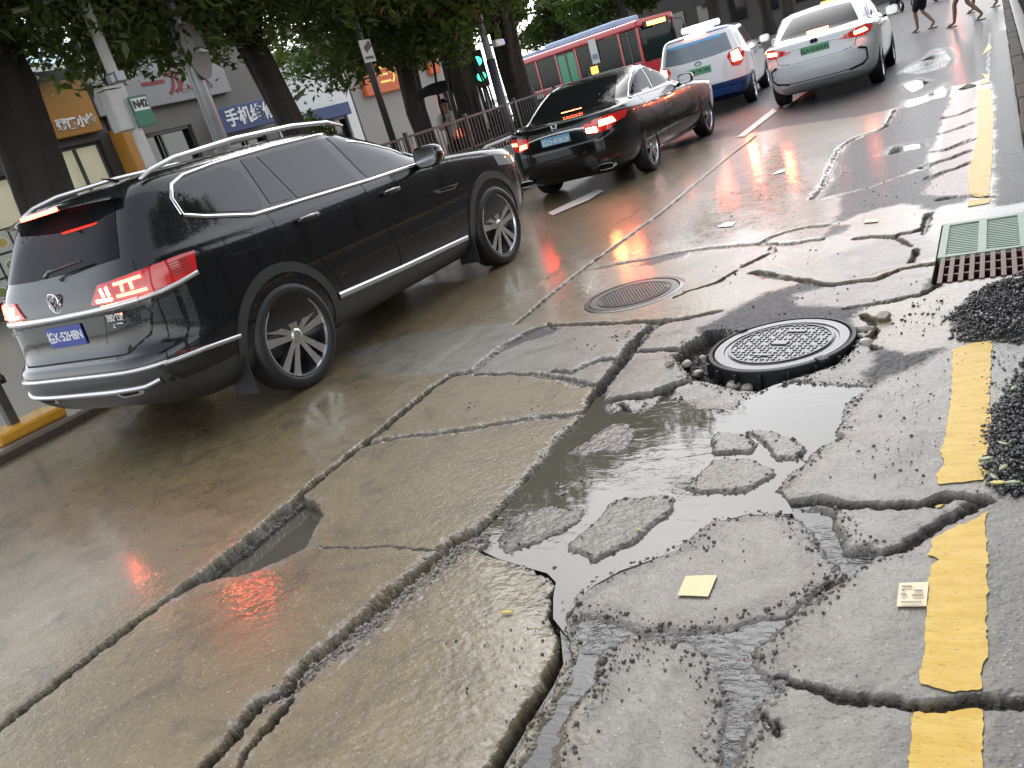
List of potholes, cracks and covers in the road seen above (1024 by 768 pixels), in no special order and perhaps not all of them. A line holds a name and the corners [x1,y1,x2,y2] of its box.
manhole cover [584,276,685,313]
drain grate [937,212,1024,266]
manhole cover [706,317,862,392]
crack [194,317,693,768]
crack [757,672,1024,739]
pothole [198,496,324,586]
crack [776,490,996,558]
pothole [483,380,869,571]
crack [585,107,997,351]
